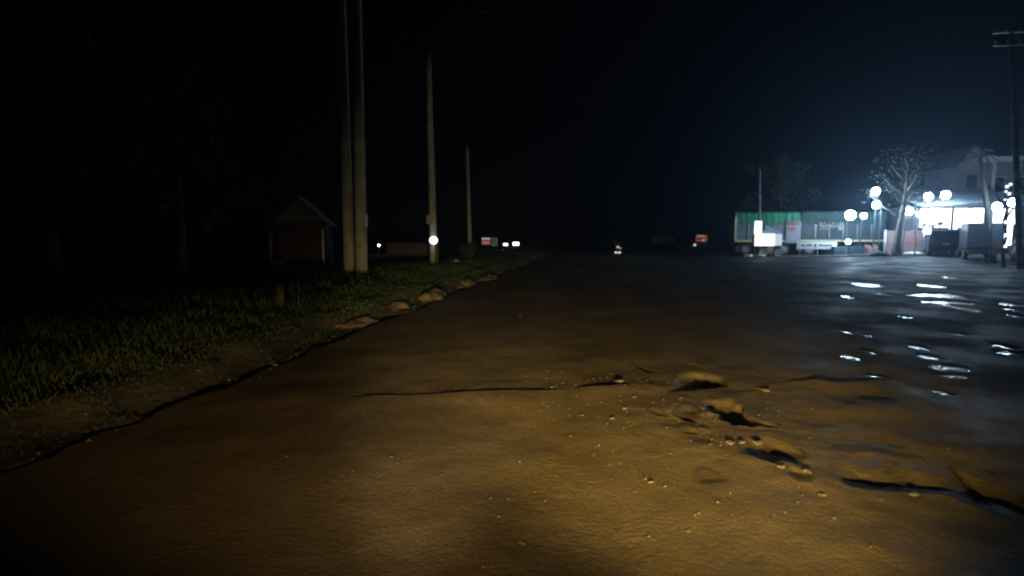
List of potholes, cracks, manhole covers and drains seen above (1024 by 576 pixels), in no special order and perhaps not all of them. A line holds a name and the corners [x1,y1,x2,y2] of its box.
crack [356,383,627,397]
pothole [664,370,728,392]
pothole [783,465,816,483]
crack [734,378,891,392]
pothole [731,428,808,465]
pothole [698,398,780,428]
